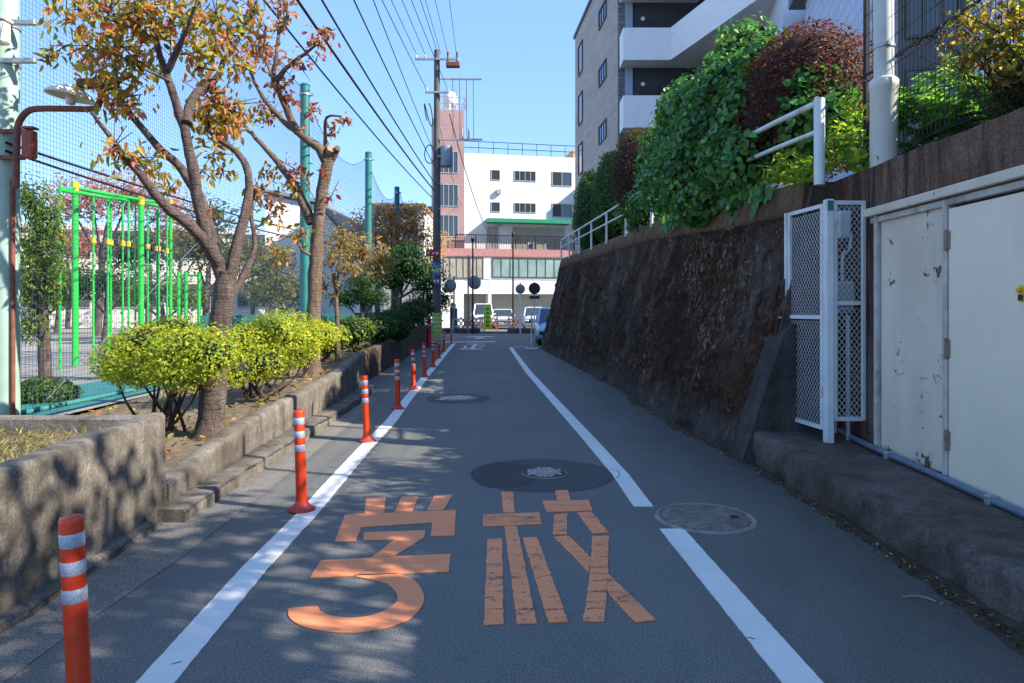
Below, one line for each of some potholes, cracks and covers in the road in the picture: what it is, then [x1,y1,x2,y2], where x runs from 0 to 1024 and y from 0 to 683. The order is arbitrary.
manhole cover [654,503,758,534]
